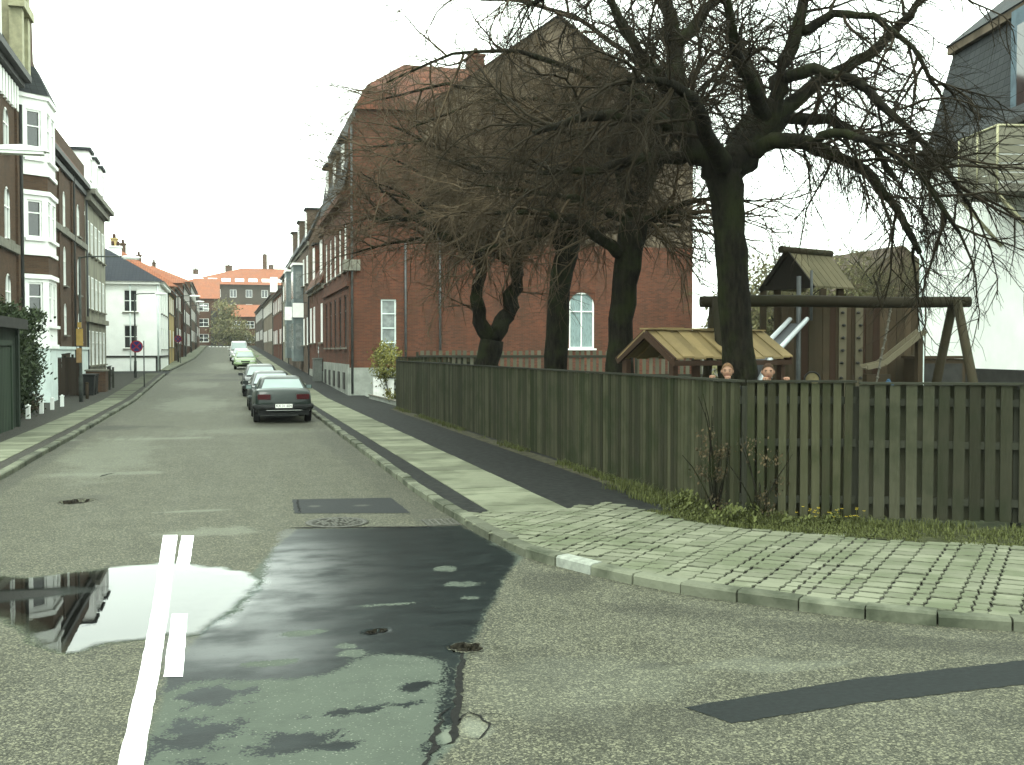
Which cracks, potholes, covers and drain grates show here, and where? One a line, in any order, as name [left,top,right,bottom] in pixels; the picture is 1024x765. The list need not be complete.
crack [422,653,494,765]
manhole cover [305,517,369,528]
pothole [446,642,484,653]
